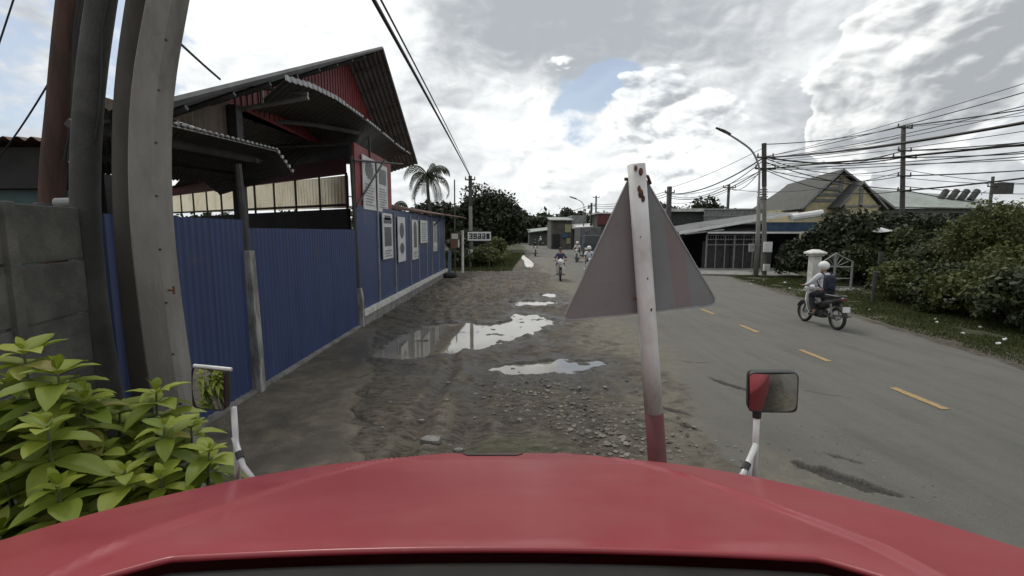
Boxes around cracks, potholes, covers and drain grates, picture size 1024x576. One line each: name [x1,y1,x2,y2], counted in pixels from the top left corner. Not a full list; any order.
pothole [489,357,611,375]
pothole [367,313,557,359]
